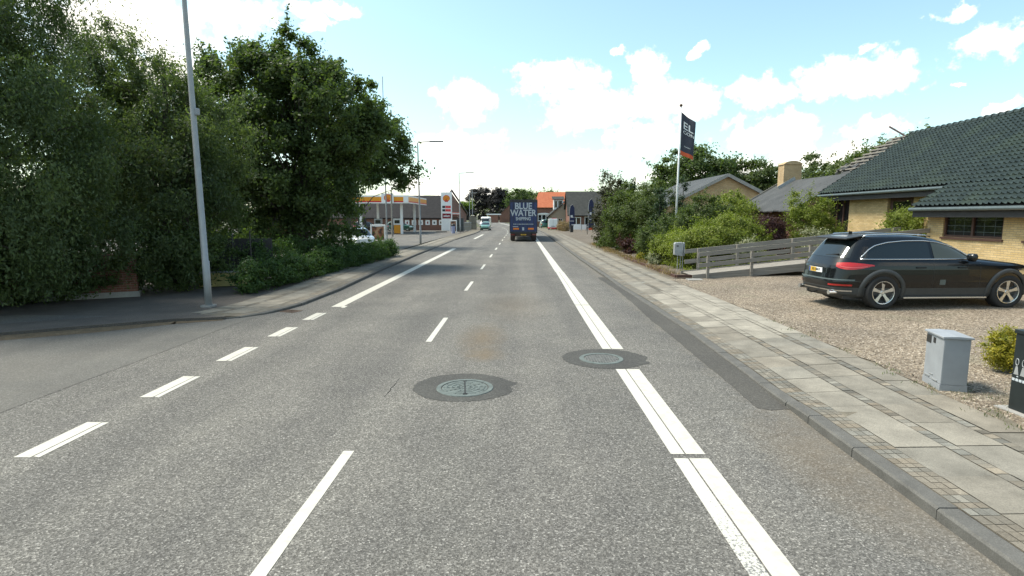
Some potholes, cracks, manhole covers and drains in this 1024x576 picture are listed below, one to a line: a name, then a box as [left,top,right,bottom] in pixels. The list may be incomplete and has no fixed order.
manhole cover [436,379,493,397]
manhole cover [579,353,623,364]
